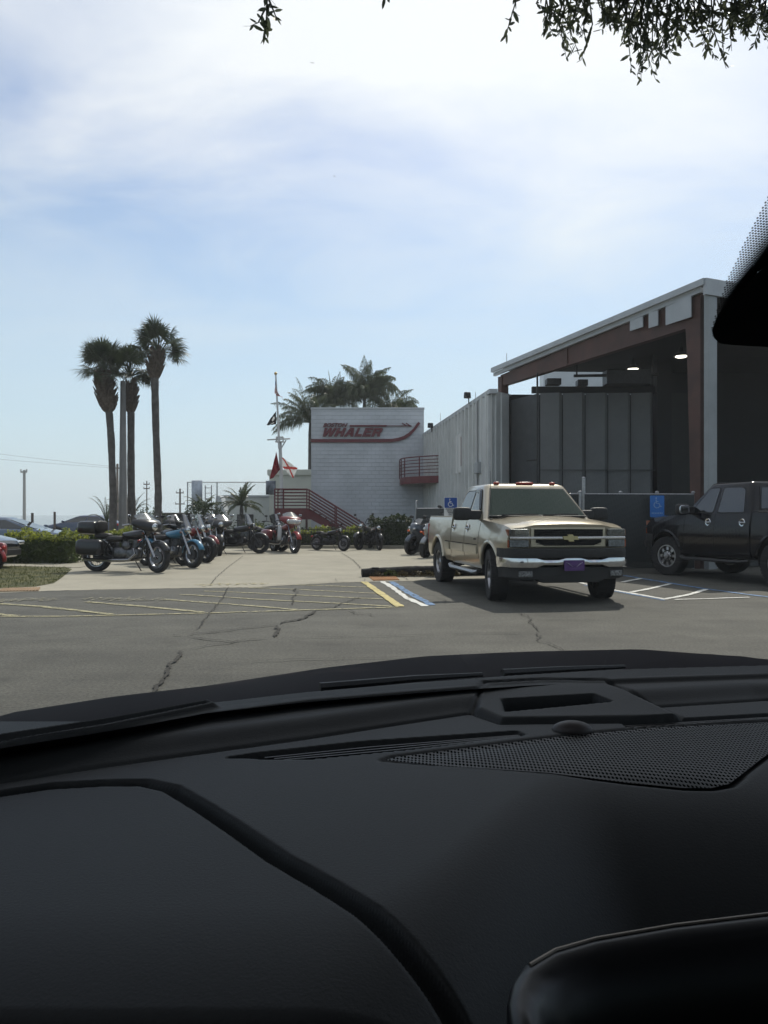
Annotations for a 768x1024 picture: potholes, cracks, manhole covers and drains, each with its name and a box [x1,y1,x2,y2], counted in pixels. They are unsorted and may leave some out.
crack [518,611,675,651]
crack [8,587,523,692]
